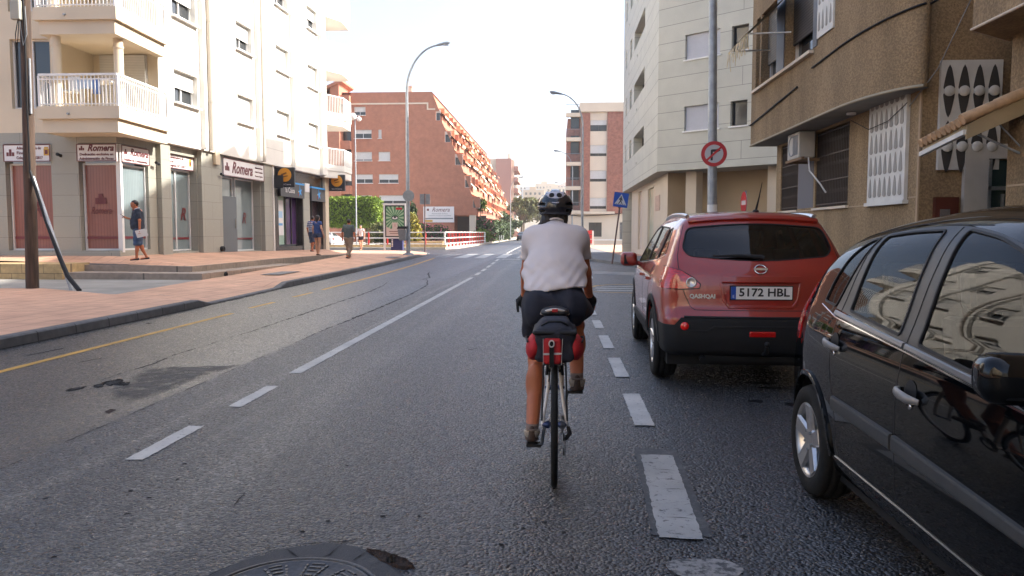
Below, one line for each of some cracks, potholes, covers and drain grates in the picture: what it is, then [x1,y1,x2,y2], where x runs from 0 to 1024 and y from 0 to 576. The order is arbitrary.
pothole [366,548,416,570]
manhole cover [209,543,404,576]
crack [227,273,430,343]
